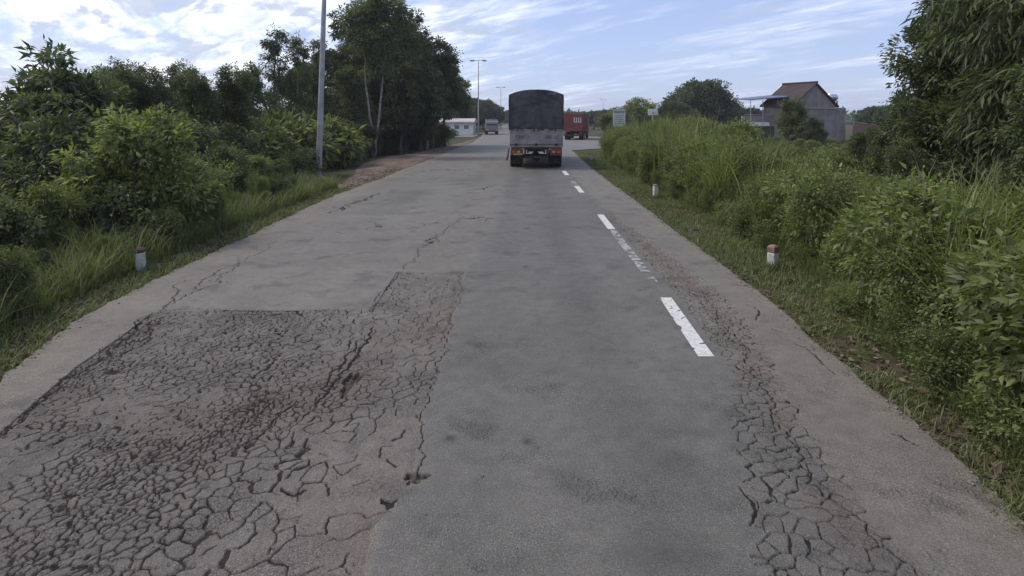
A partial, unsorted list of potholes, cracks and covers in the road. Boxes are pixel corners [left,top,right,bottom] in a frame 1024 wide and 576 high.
crack [622,225,917,576]
crack [0,249,459,576]
